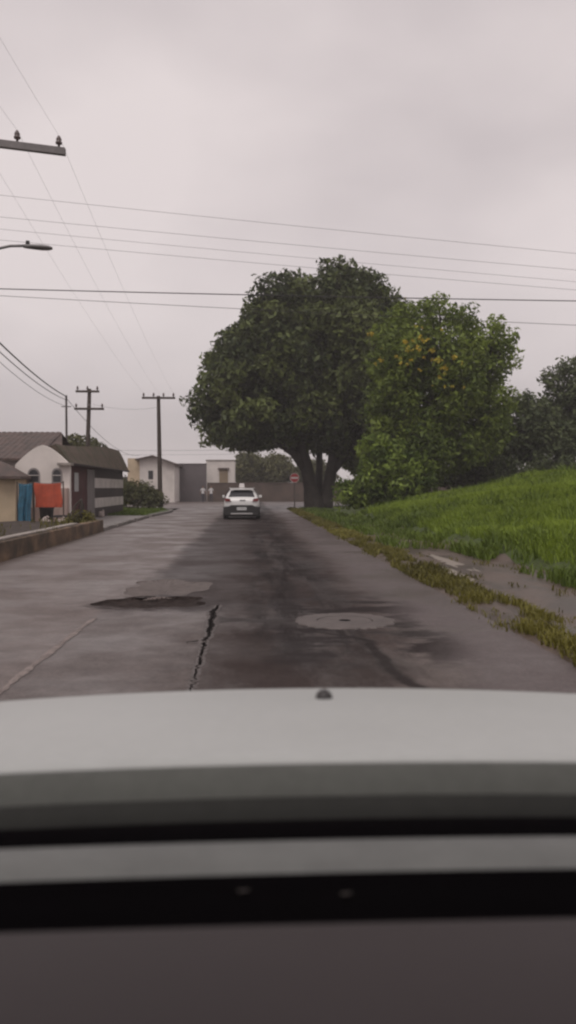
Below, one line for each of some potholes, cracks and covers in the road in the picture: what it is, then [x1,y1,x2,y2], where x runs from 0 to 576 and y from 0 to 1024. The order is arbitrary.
crack [185,604,222,691]
pothole [84,596,210,610]
manhole cover [295,613,396,630]
